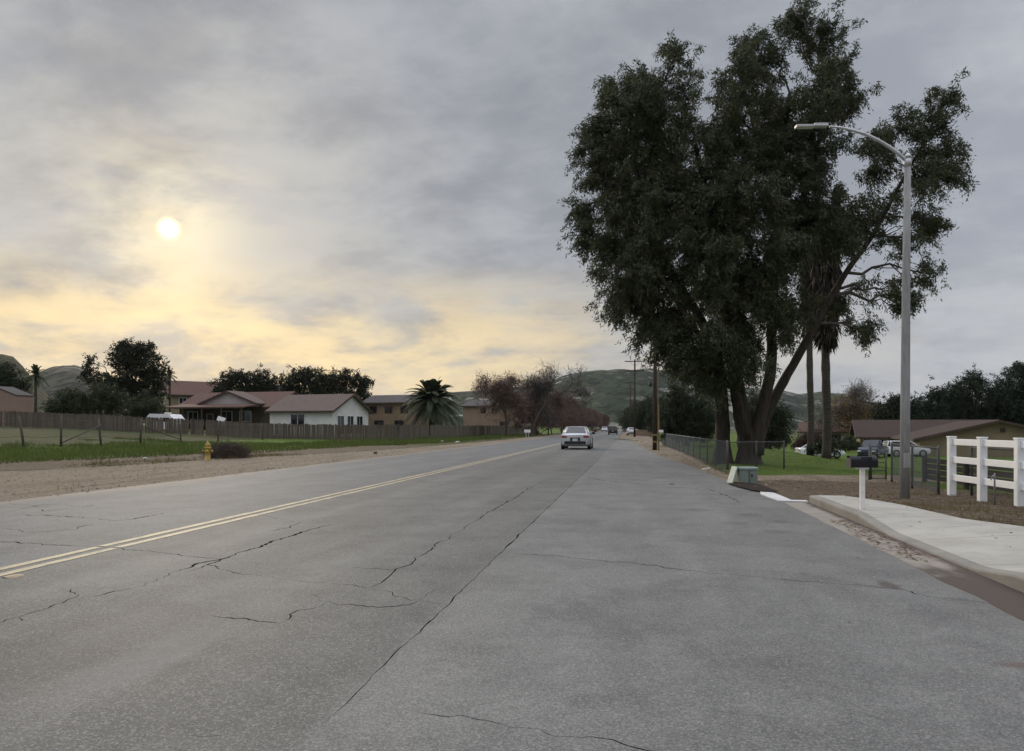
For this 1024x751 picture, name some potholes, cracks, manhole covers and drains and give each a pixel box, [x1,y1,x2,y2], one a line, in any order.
crack [0,589,79,623]
crack [535,554,983,603]
crack [5,503,335,597]
crack [214,481,545,623]
crack [419,712,650,751]
